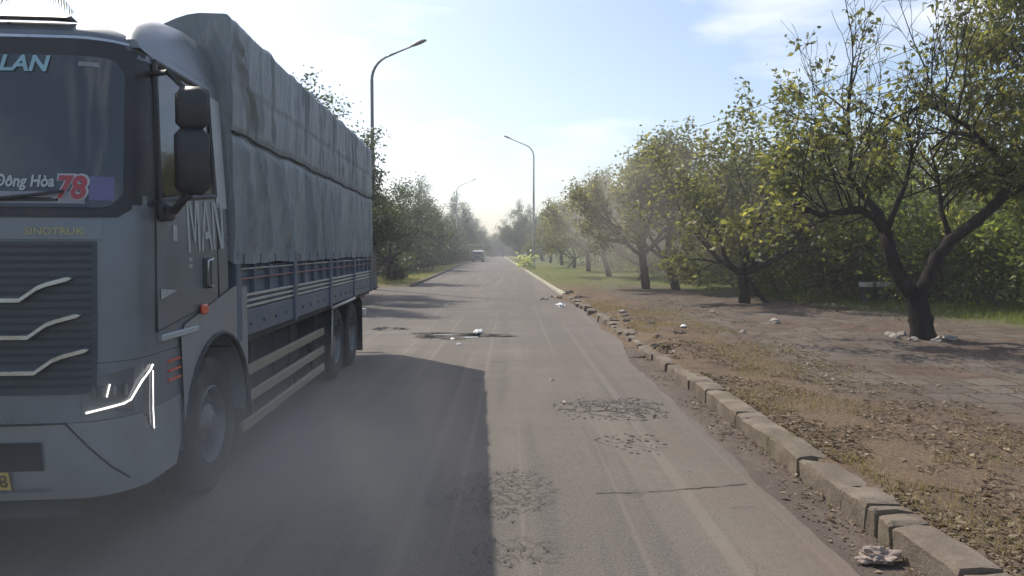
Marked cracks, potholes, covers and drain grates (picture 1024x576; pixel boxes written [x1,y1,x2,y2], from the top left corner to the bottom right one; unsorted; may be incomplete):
crack [600,483,747,493]
